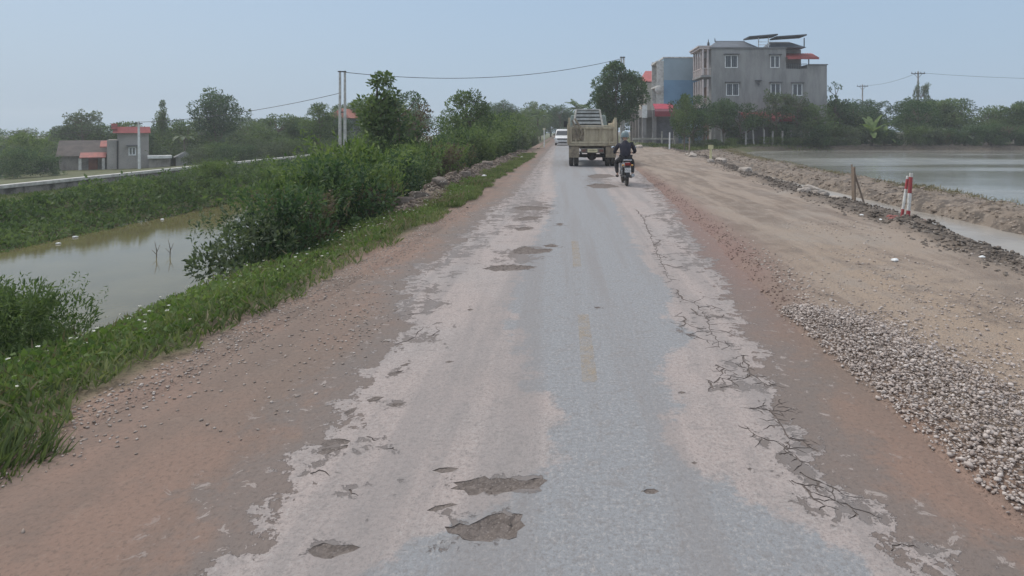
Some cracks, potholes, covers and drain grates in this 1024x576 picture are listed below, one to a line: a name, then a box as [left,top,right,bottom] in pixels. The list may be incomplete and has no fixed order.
pothole [308,543,360,559]
crack [638,211,880,518]
pothole [447,476,547,495]
pothole [445,513,525,542]
